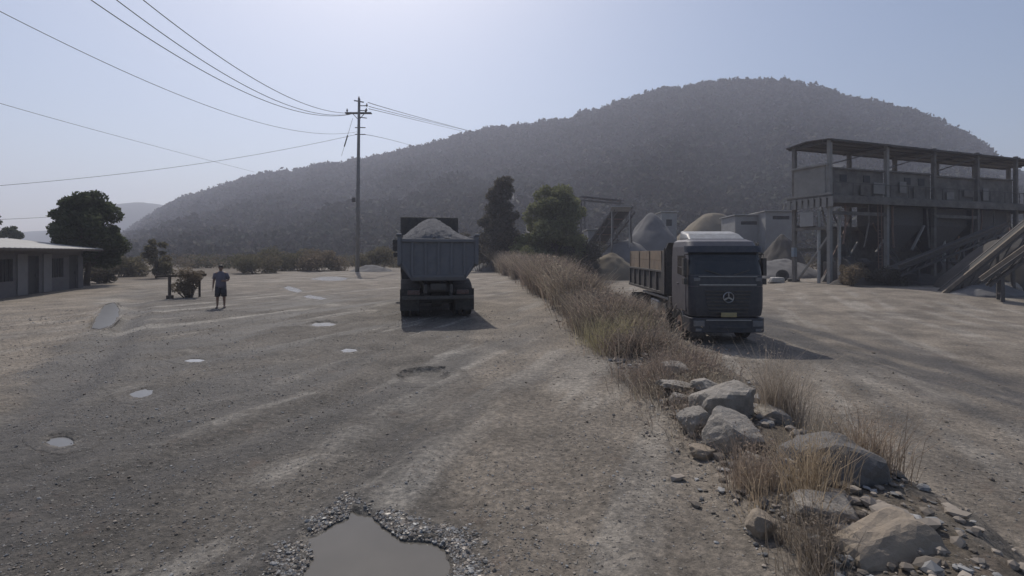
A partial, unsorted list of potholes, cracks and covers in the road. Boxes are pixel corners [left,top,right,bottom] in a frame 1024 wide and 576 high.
pothole [380,363,469,388]
pothole [243,489,510,576]
